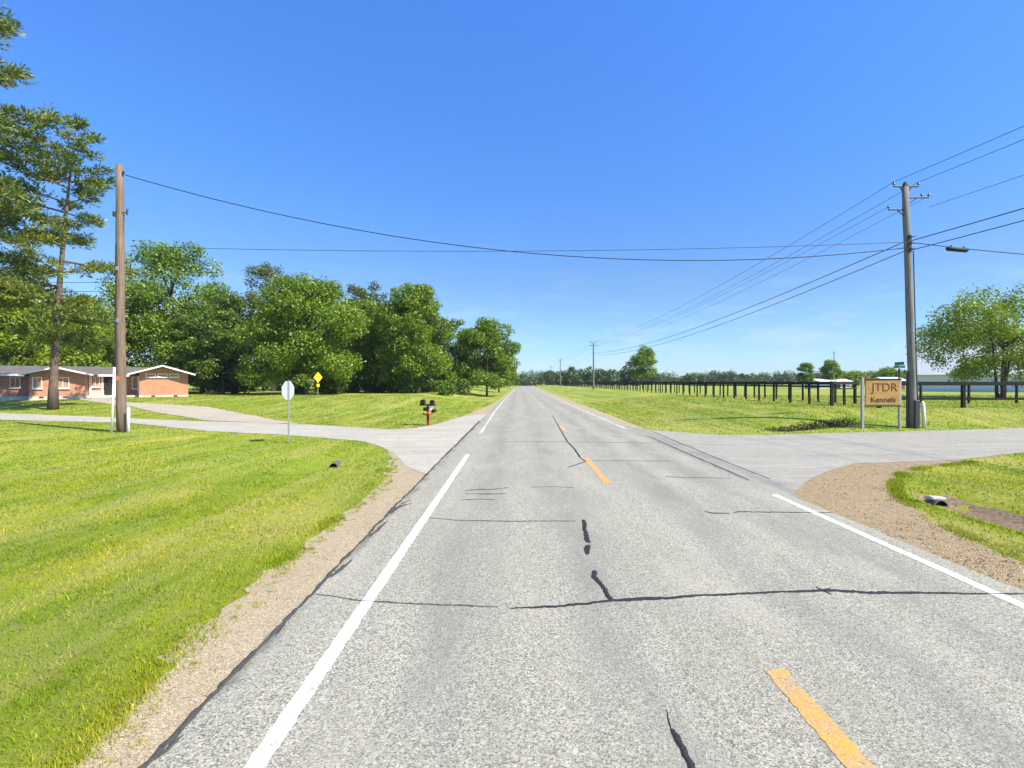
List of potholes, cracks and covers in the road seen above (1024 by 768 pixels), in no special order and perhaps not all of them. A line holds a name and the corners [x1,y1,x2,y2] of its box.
crack [138,421,1024,768]
